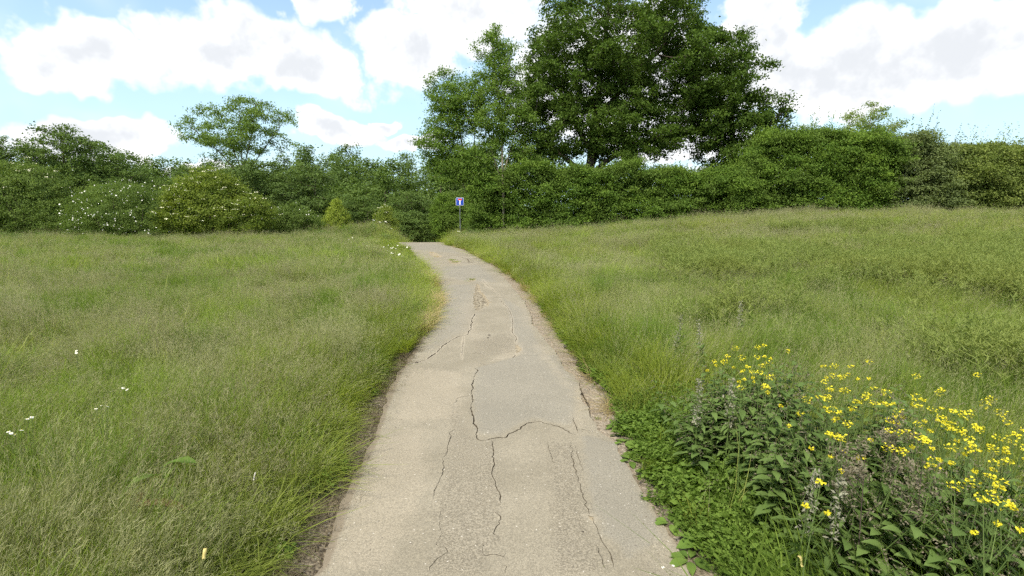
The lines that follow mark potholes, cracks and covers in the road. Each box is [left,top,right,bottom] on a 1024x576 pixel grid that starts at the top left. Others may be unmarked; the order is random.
crack [420,286,614,570]
